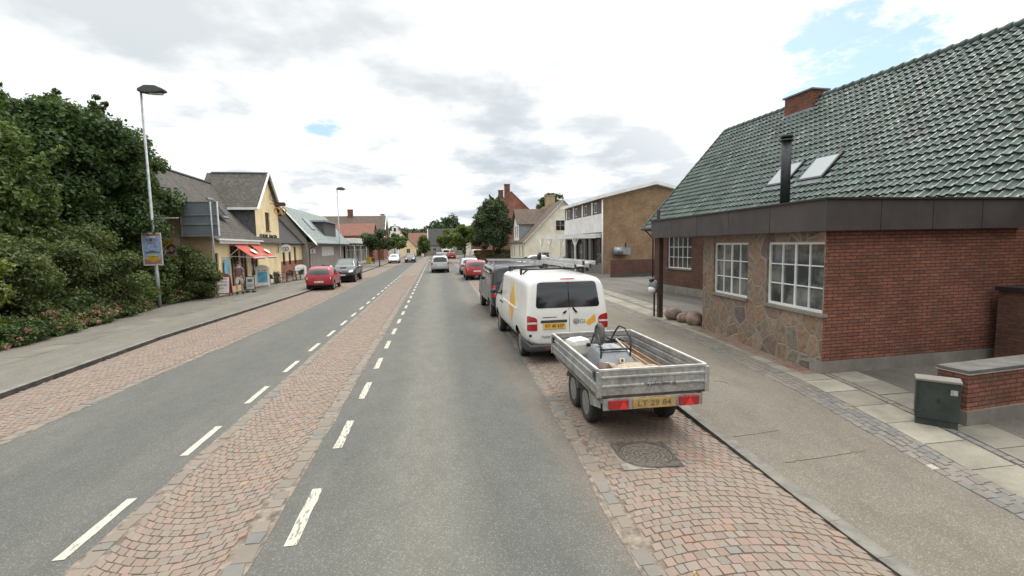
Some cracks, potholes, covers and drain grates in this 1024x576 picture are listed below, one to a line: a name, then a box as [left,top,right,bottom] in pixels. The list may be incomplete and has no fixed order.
manhole cover [611,441,684,470]
